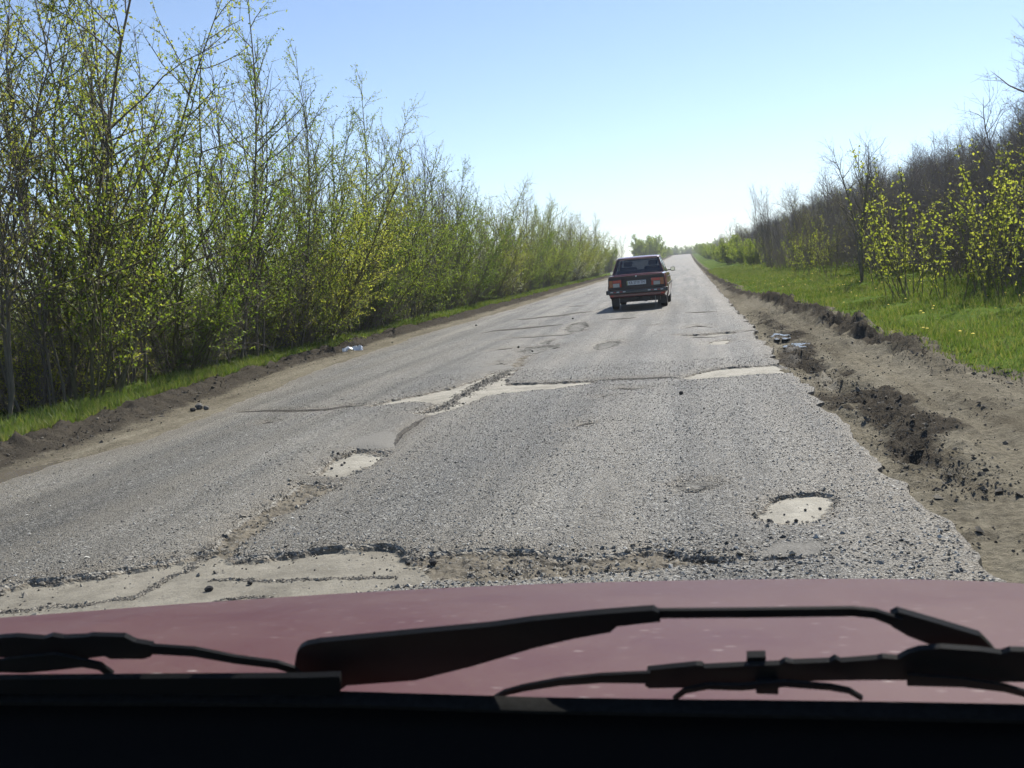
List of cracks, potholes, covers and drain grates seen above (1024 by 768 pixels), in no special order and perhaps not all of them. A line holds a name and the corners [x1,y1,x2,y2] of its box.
crack [236,405,364,424]
crack [484,306,637,365]
pothole [313,448,393,478]
pothole [367,369,597,415]
crack [0,543,398,614]
pothole [681,363,791,379]
pothole [0,543,434,618]
pothole [754,492,841,525]
pothole [414,547,825,583]
